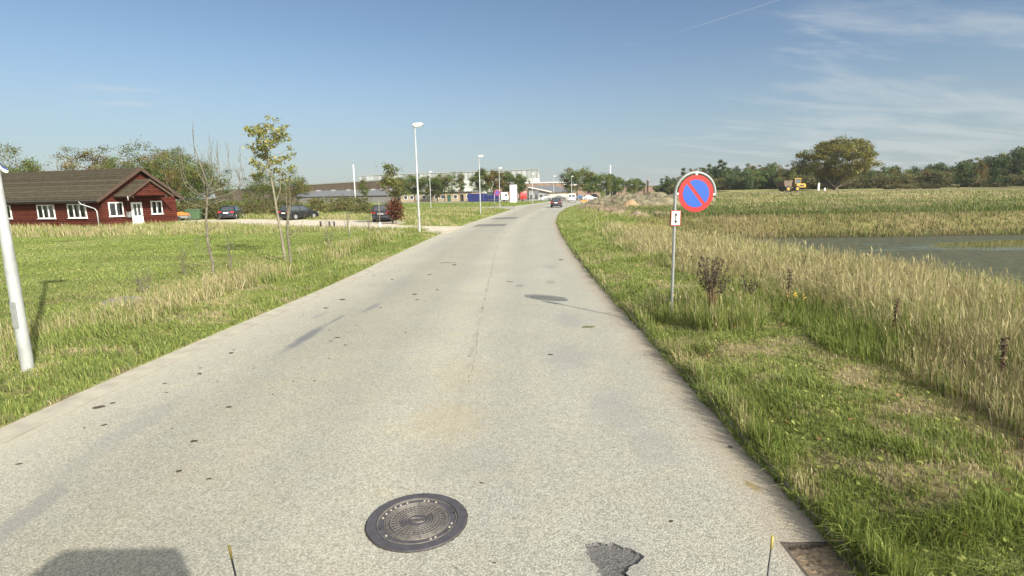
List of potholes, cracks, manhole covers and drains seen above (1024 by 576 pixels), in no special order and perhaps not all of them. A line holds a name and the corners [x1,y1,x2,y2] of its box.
manhole cover [364,493,468,553]
pothole [585,542,644,576]
drain grate [780,542,859,576]
